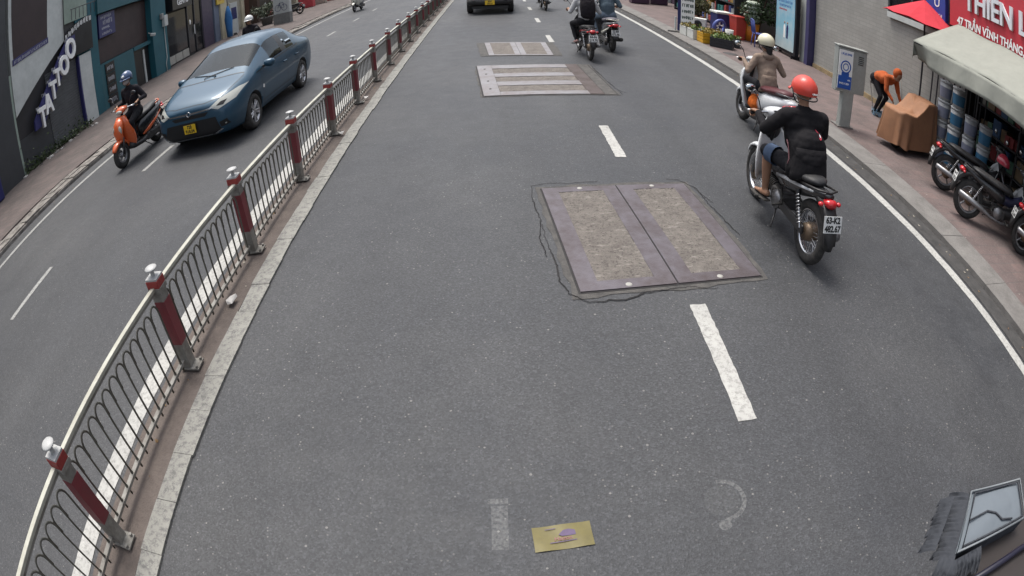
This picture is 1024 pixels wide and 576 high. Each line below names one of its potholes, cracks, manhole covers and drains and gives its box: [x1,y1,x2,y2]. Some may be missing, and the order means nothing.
manhole cover [535,182,768,300]
crack [531,181,717,302]
manhole cover [477,42,562,57]
manhole cover [475,64,620,98]
